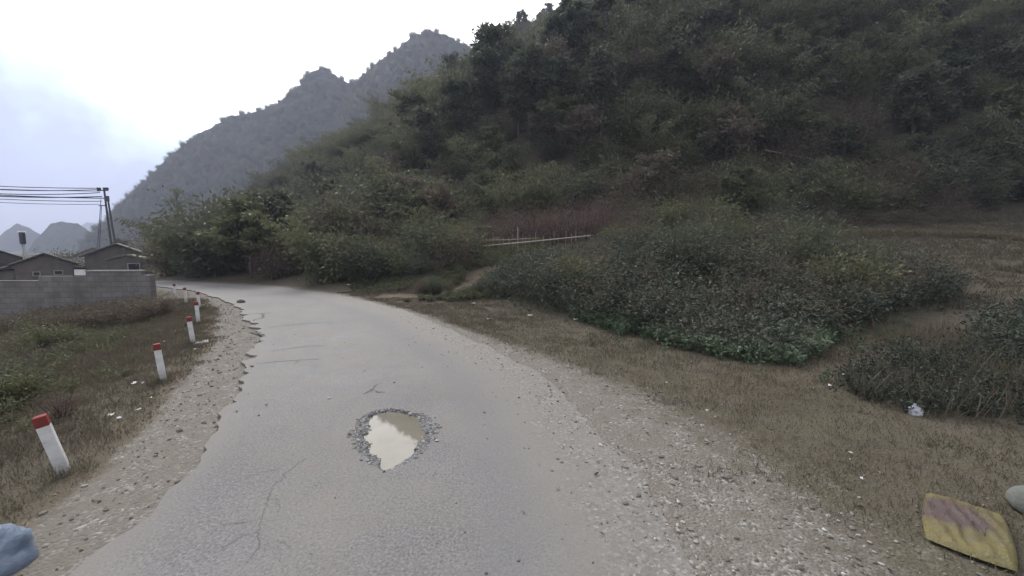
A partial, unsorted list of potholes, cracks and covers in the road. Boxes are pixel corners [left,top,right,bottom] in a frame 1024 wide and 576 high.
pothole [346,408,442,472]
crack [218,458,306,560]
crack [234,313,330,364]
